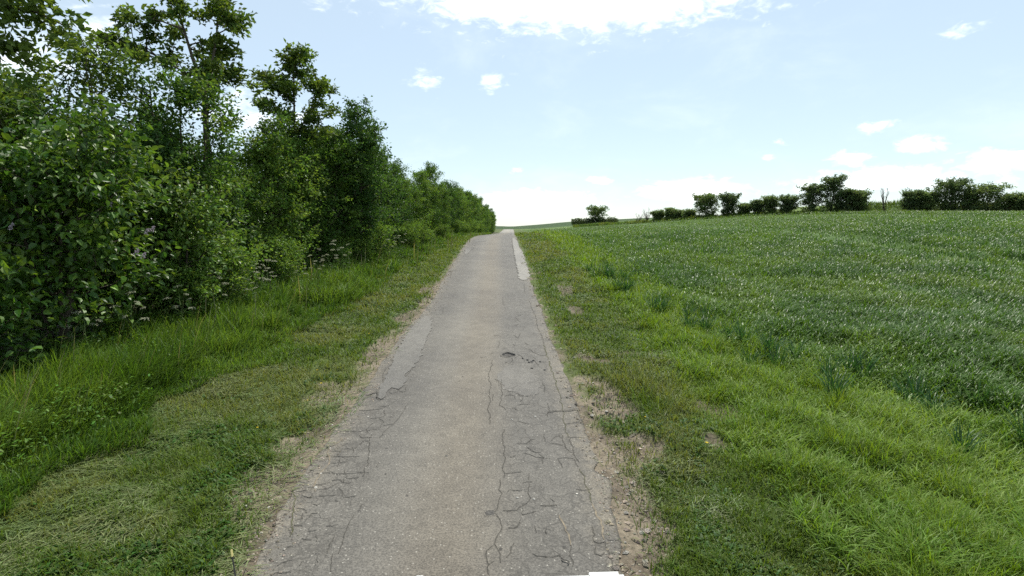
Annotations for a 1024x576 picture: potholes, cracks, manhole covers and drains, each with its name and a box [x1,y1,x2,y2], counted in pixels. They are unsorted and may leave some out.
crack [272,335,414,574]
crack [481,284,584,574]
